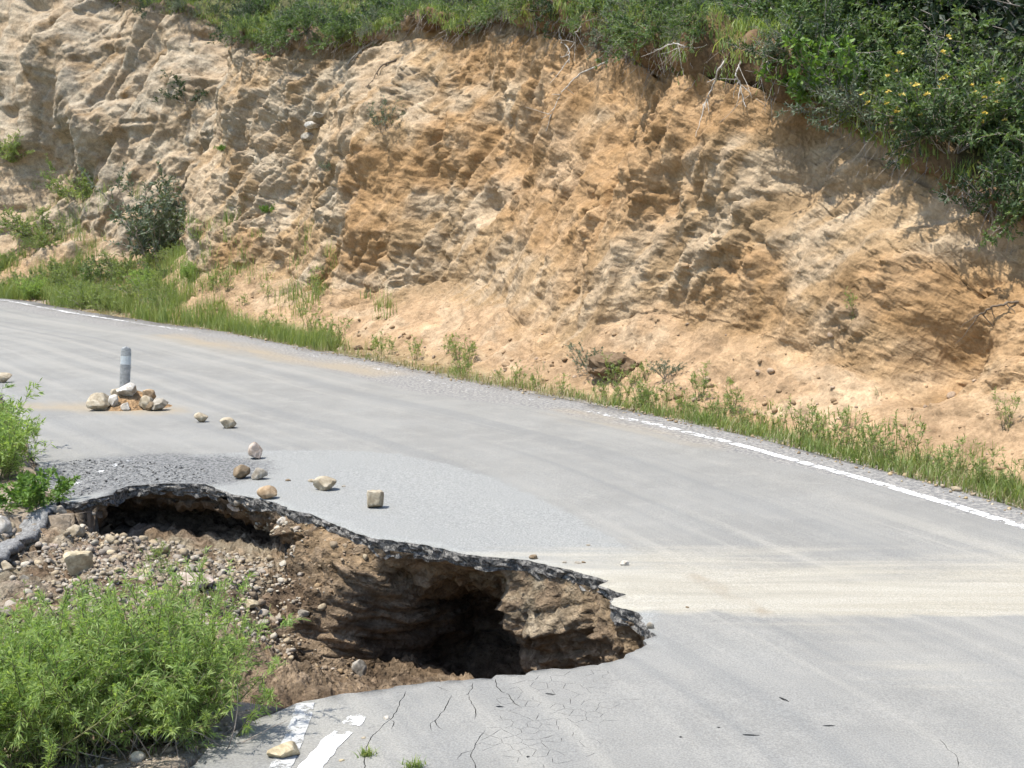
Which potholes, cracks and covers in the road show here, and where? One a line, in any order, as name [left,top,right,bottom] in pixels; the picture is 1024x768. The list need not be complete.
pothole [0,491,645,763]
crack [430,670,617,768]
crack [364,691,406,768]
